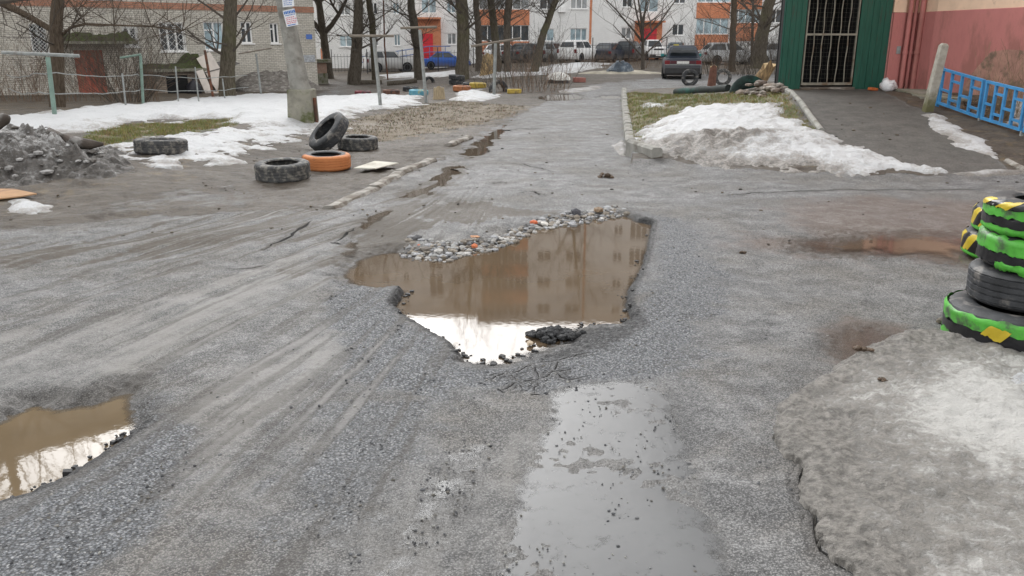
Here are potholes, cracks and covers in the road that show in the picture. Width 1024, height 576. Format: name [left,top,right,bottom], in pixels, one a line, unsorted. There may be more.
crack [222,220,363,271]
pothole [736,221,976,277]
pothole [0,368,180,510]
pothole [306,207,663,376]
